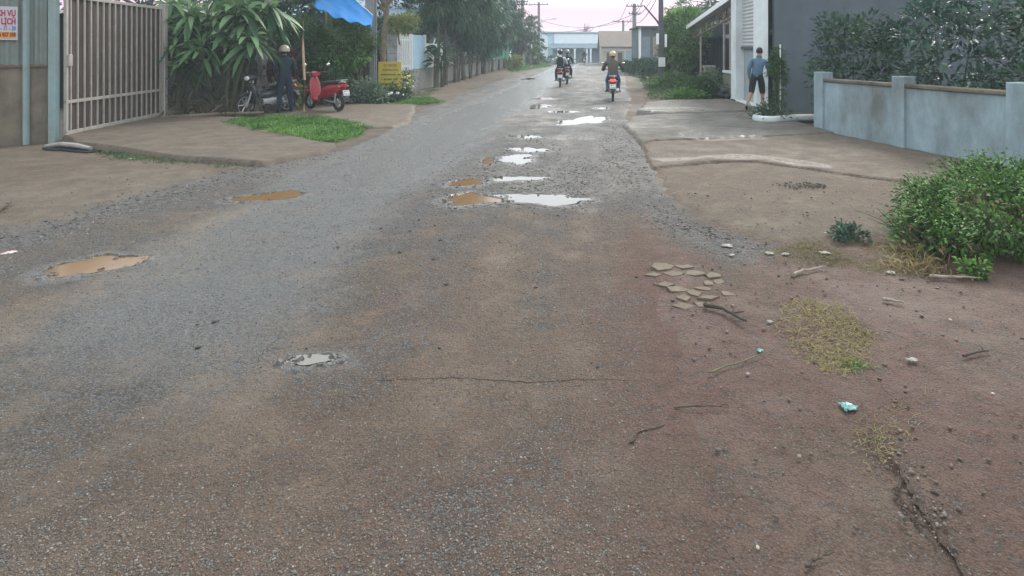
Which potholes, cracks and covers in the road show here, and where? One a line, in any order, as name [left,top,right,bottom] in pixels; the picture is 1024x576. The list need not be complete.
pothole [491,154,538,167]
pothole [30,252,165,283]
pothole [553,115,613,127]
pothole [481,175,554,183]
pothole [274,350,351,375]
pothole [482,192,598,209]
pothole [221,189,312,204]
pothole [475,157,502,167]
crack [881,451,969,576]
pothole [436,191,514,209]
pothole [441,177,491,188]
